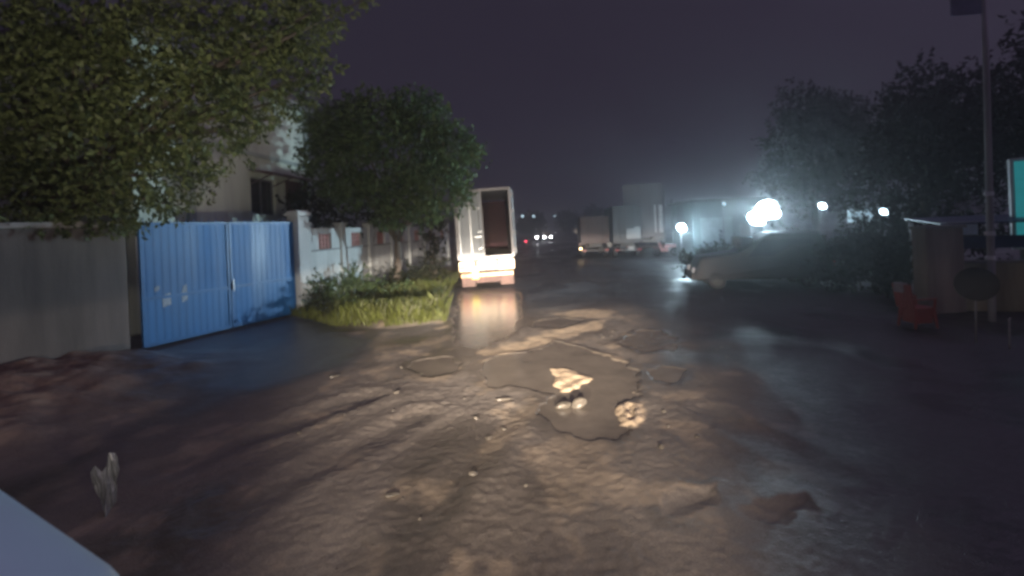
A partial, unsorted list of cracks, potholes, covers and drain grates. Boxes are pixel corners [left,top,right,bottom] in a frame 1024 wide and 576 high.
pothole [614,330,680,353]
pothole [646,365,689,384]
pothole [478,341,641,440]
pothole [737,492,823,526]
pothole [405,356,462,377]
